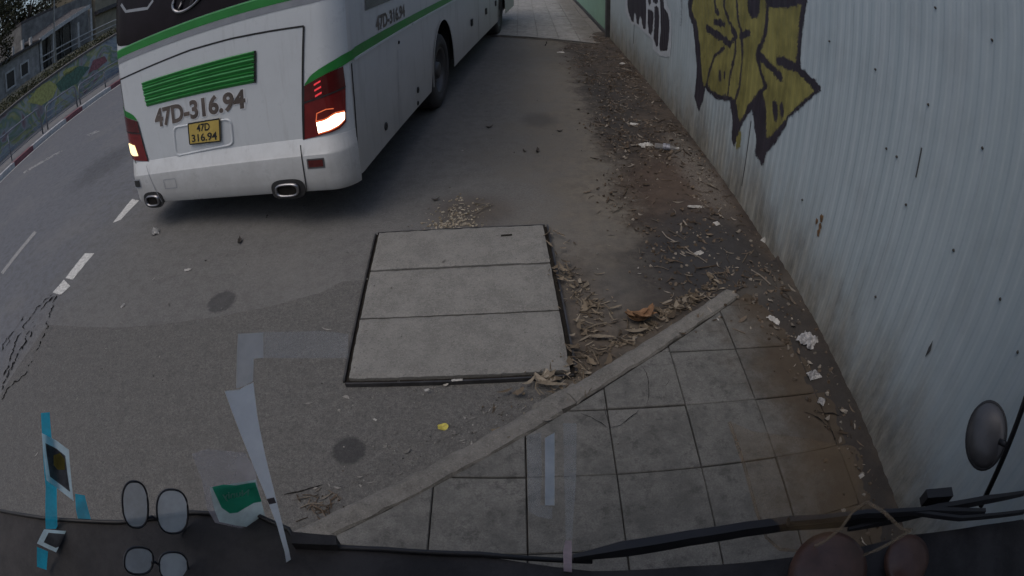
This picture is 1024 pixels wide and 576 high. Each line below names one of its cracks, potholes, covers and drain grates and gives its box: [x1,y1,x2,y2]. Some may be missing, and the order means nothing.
crack [1,294,57,399]
manhole cover [343,224,578,387]
crack [583,368,669,428]
